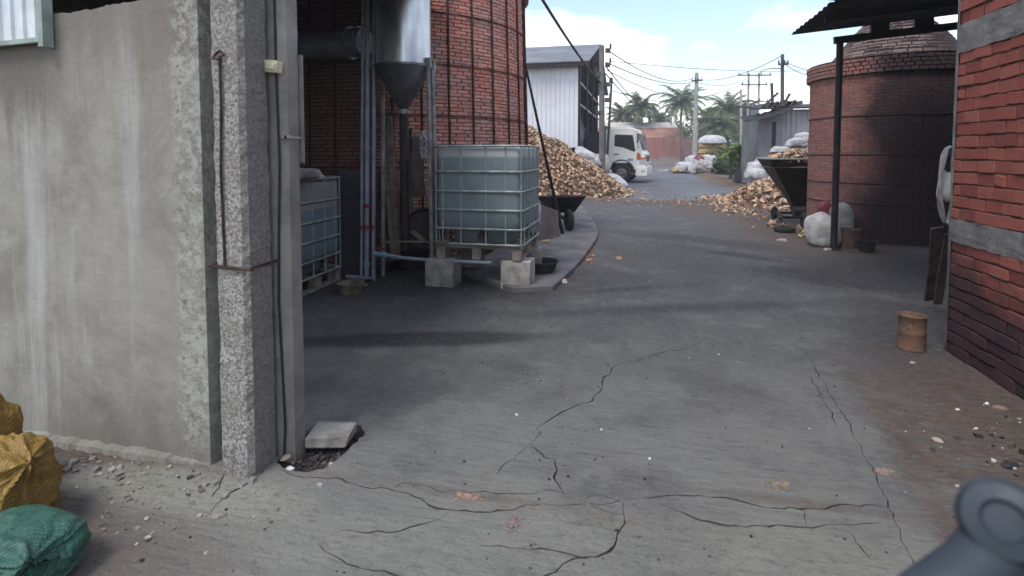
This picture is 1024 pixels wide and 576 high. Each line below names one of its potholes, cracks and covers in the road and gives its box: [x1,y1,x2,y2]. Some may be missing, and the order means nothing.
crack [207,470,264,516]
pothole [277,425,365,472]
crack [396,339,703,498]
crack [476,495,626,576]
crack [734,342,914,564]
crack [319,513,447,576]
